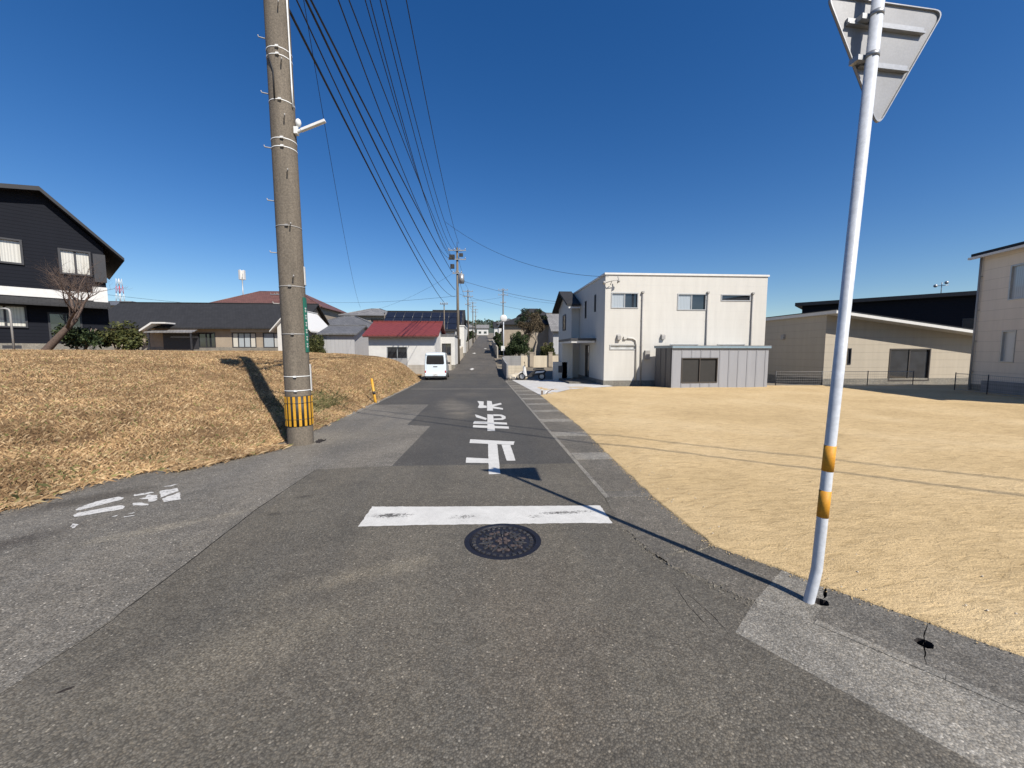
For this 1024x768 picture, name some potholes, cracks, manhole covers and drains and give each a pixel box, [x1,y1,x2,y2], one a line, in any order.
manhole cover [464,523,541,560]
crack [618,524,757,642]
